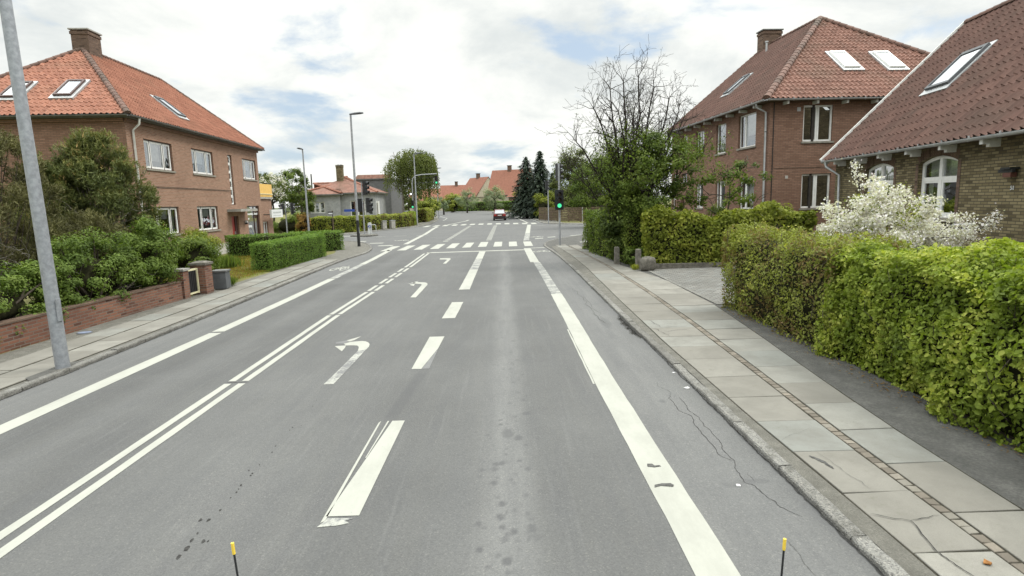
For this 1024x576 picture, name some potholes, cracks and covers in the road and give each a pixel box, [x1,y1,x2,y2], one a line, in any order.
crack [657,383,798,515]
